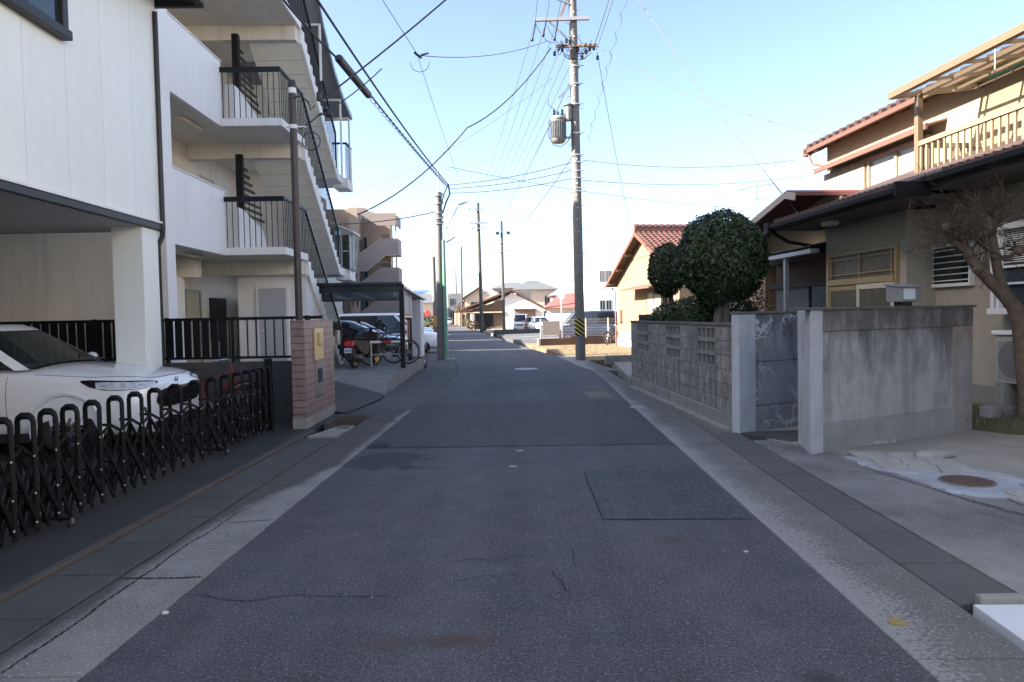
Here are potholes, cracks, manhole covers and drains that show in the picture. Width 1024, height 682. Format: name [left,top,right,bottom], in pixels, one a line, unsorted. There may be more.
manhole cover [938,475,997,488]
crack [441,550,576,592]
crack [0,503,393,674]
